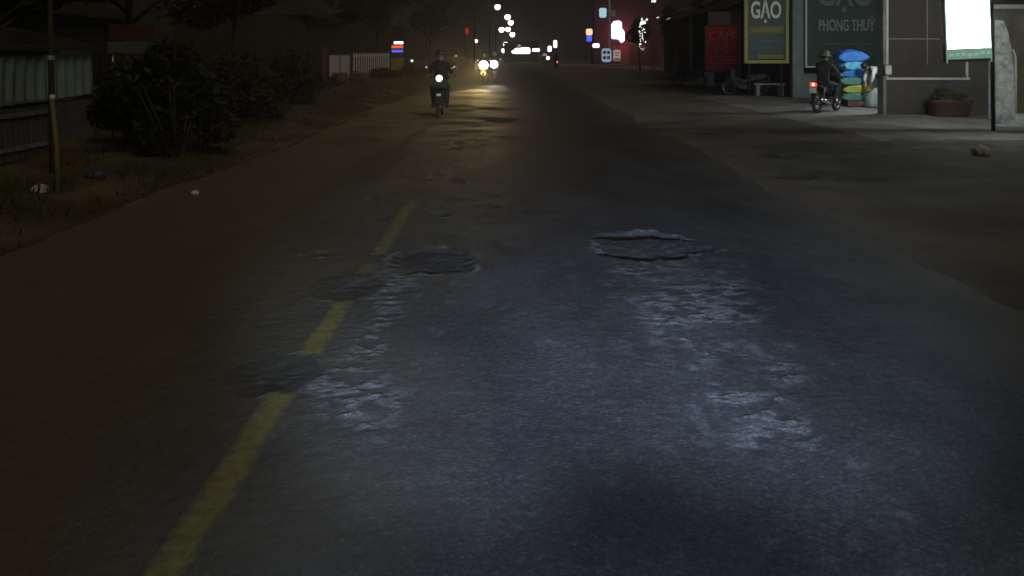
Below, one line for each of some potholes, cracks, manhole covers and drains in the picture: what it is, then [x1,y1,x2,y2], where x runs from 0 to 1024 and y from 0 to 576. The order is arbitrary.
pothole [586,229,722,262]
crack [596,256,896,551]
pothole [309,274,390,301]
pothole [222,352,327,399]
pothole [386,246,478,276]
